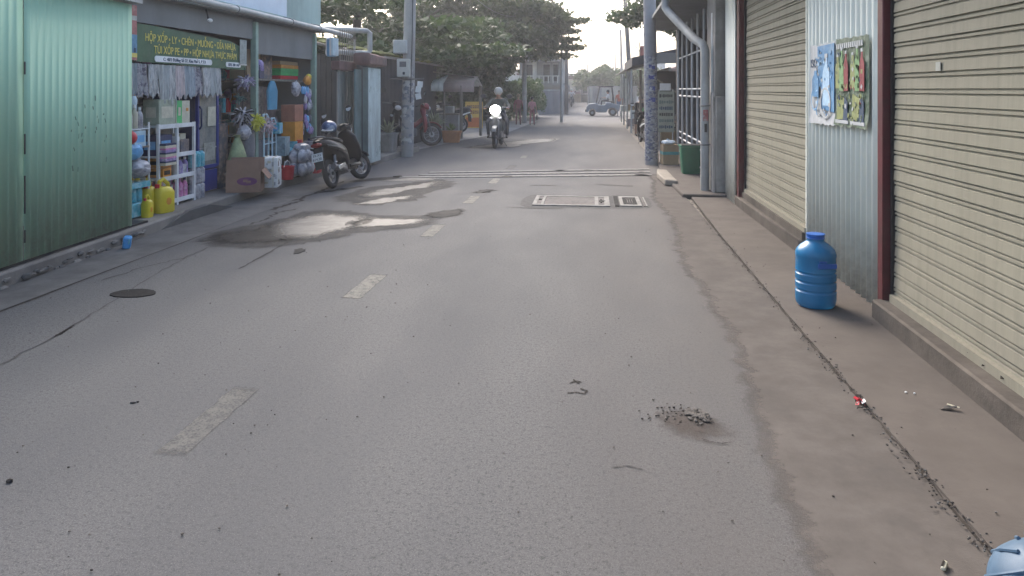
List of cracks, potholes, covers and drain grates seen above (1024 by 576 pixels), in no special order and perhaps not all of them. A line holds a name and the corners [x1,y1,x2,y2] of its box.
crack [0,247,208,365]
pothole [638,399,728,444]
crack [239,245,283,269]
manhole cover [520,195,613,209]
